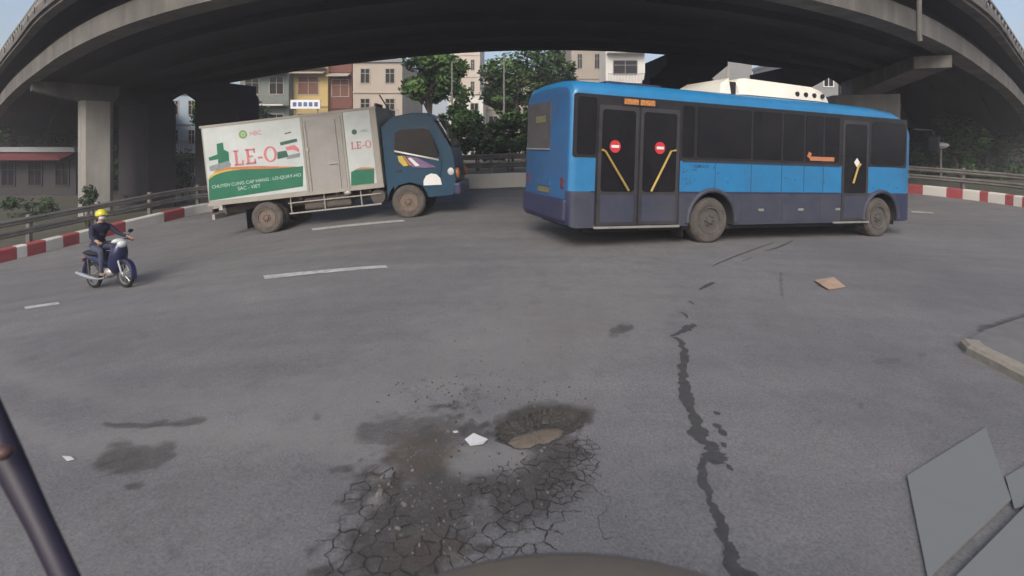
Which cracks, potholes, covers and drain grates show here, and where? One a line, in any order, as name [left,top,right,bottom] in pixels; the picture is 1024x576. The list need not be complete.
pothole [493,408,585,450]
crack [671,240,793,576]
crack [316,435,611,576]
